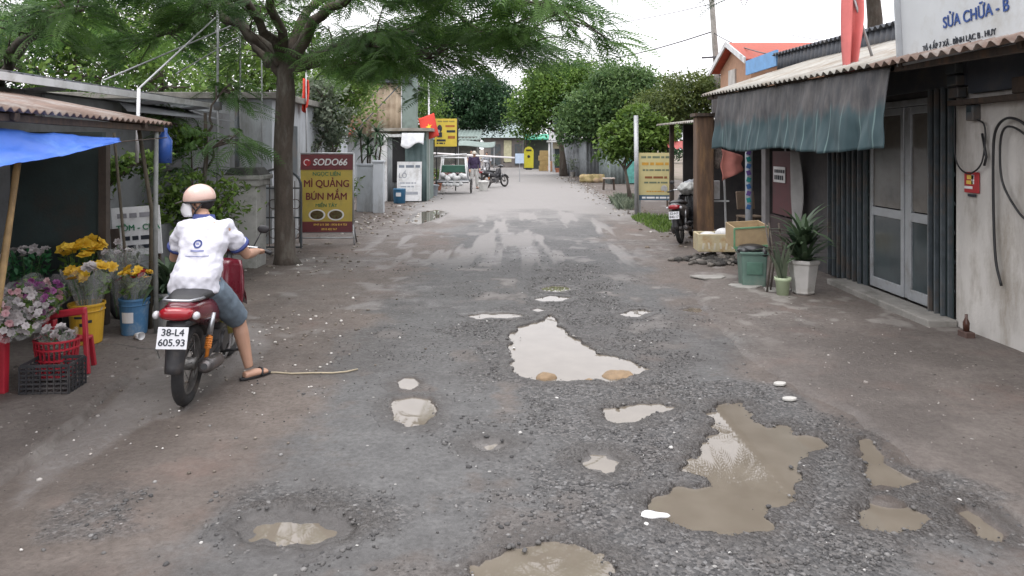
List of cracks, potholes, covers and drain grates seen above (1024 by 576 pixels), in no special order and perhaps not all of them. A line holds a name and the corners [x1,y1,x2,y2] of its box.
pothole [609,307,661,320]
pothole [584,397,693,431]
pothole [370,391,454,433]
pothole [444,521,641,576]
pothole [405,209,448,225]
pothole [495,312,667,387]
pothole [202,493,393,564]
pothole [379,372,433,395]
pothole [456,310,537,322]
pothole [830,485,978,551]
pothole [926,490,1024,557]
